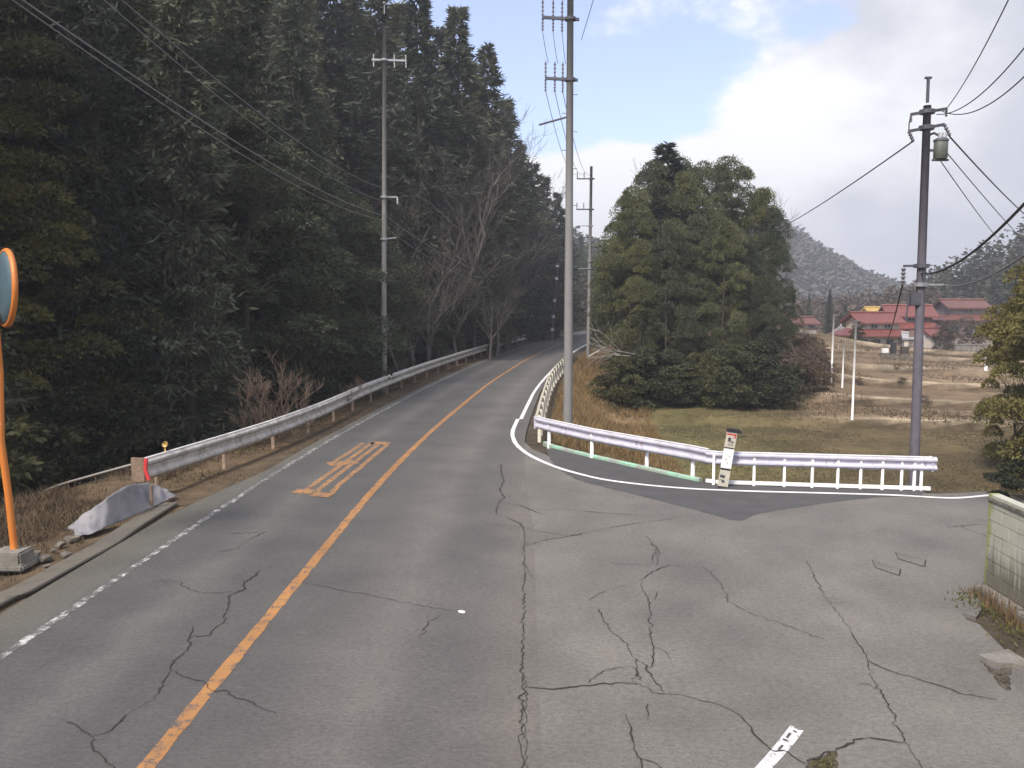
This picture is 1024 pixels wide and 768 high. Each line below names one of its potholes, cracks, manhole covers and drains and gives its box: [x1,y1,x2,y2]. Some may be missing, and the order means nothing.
pothole [981,661,1012,691]
crack [496,464,673,580]
pothole [806,751,839,768]
crack [32,571,276,768]
crack [530,536,996,768]
